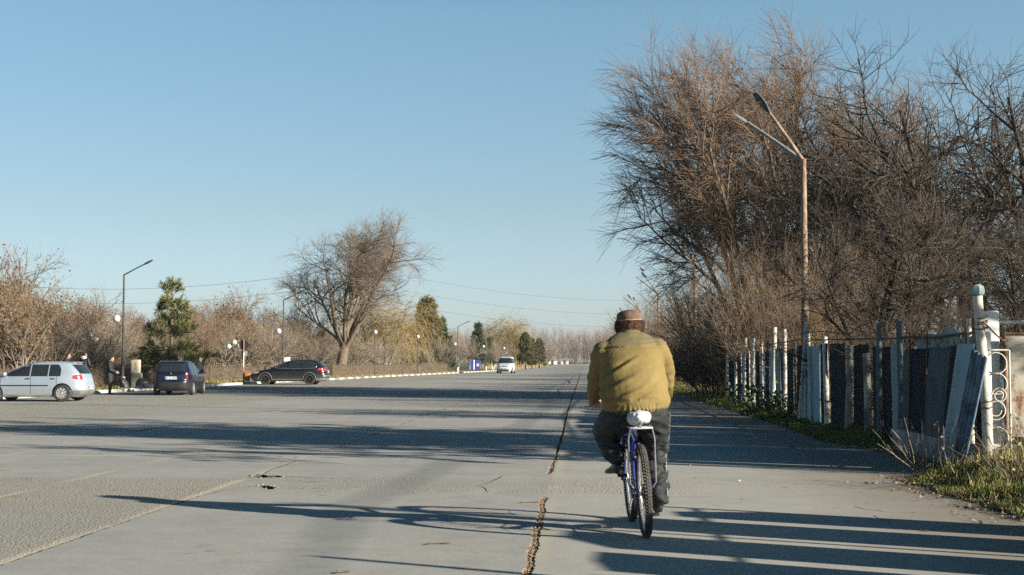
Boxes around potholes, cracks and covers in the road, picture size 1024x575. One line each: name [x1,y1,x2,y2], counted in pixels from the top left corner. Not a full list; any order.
crack [545,374,581,474]
crack [521,498,549,575]
